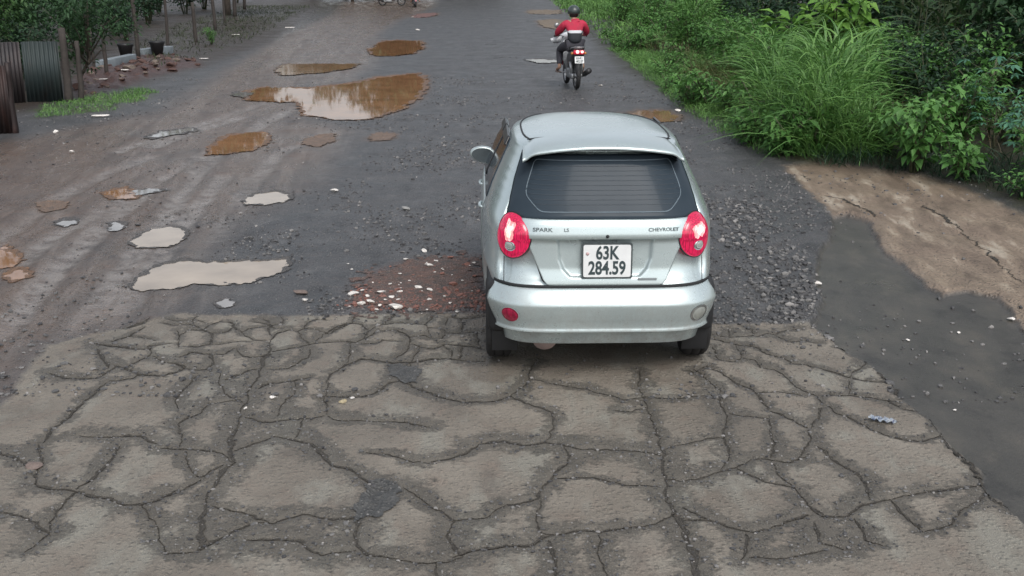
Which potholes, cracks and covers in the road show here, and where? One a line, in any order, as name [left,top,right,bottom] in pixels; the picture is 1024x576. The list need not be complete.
pothole [273,63,359,75]
pothole [367,39,426,57]
pothole [204,131,272,156]
pothole [345,249,486,320]
pothole [240,189,295,206]
crack [0,315,1009,576]
pothole [99,186,142,200]
pothole [127,226,190,248]
pothole [241,72,430,121]
pothole [143,127,198,139]
pothole [622,109,684,123]
pothole [128,256,293,292]
